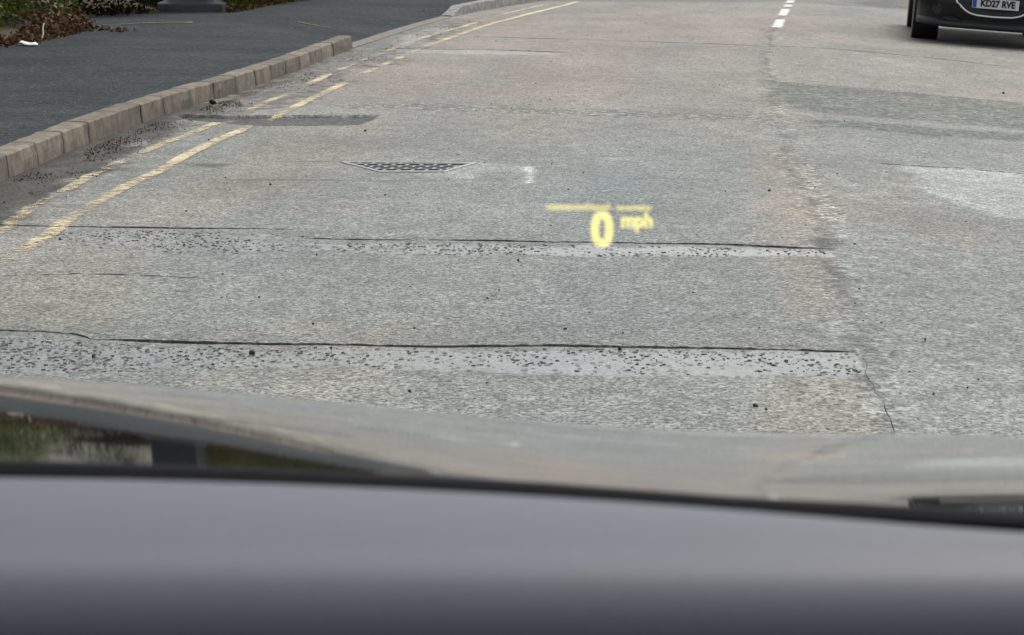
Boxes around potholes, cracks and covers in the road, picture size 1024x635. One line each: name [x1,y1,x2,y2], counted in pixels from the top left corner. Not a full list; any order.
crack [0,326,923,434]
